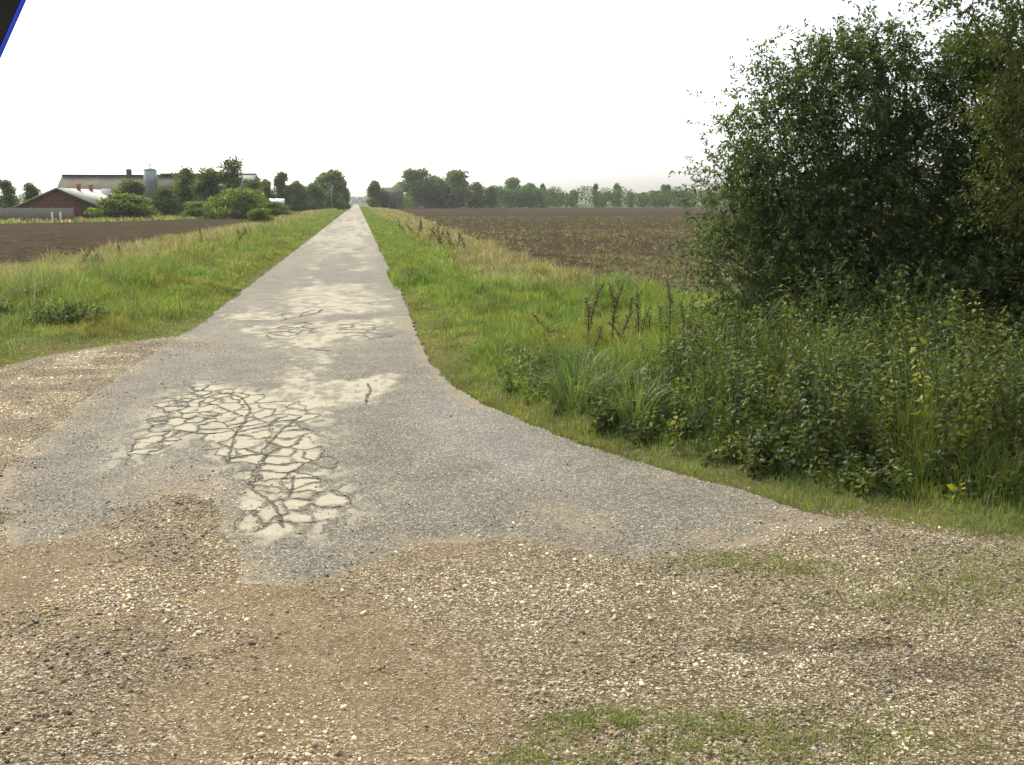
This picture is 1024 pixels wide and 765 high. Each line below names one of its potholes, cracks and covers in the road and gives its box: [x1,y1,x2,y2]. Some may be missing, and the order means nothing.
crack [260,309,330,351]
crack [125,384,351,533]
crack [336,324,390,338]
